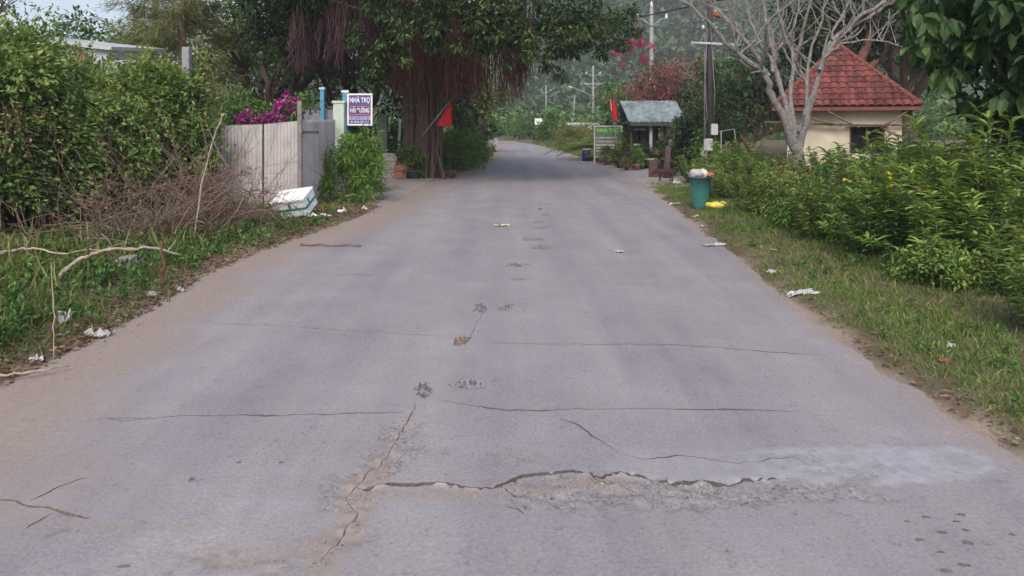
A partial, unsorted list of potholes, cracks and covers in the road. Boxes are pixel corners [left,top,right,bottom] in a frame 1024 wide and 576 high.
pothole [448,379,489,390]
pothole [414,382,433,398]
crack [508,343,823,356]
crack [0,477,88,529]
crack [98,399,799,561]
crack [213,322,445,337]
